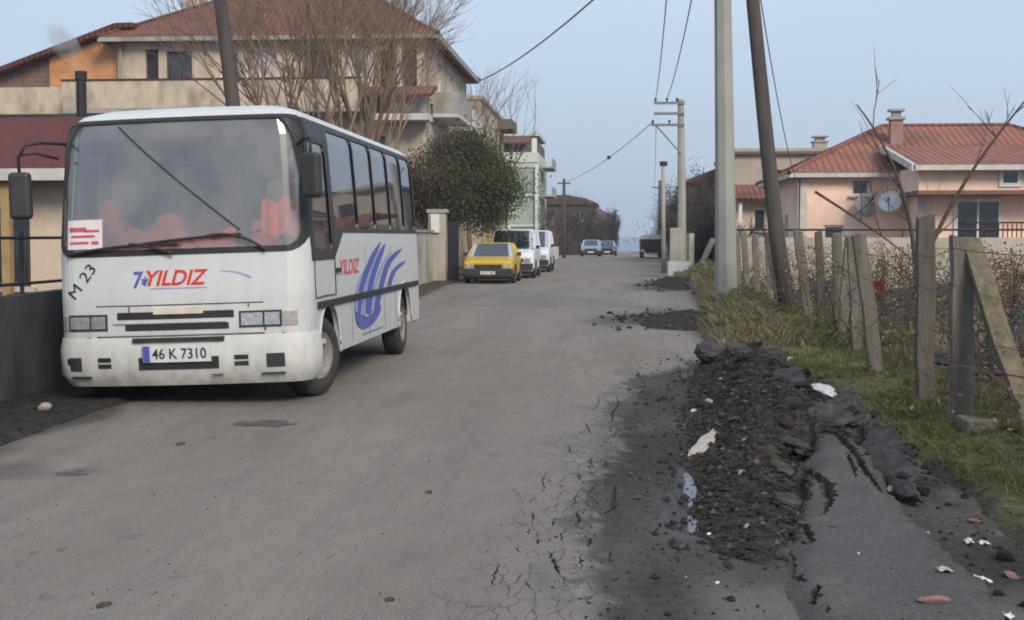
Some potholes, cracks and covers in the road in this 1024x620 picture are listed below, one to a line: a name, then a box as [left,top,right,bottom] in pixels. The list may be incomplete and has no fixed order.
crack [786,435,883,614]
crack [491,394,620,589]
